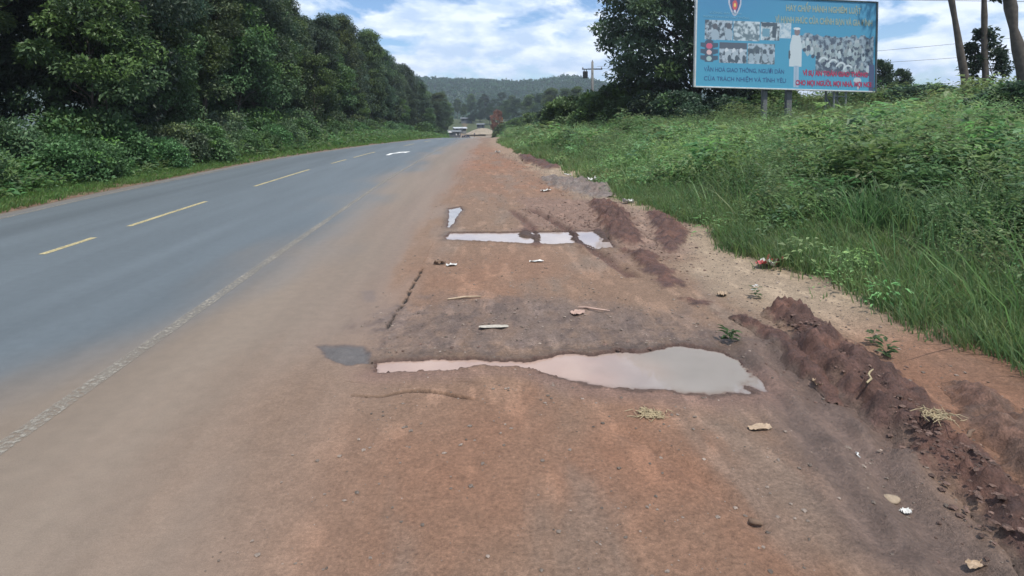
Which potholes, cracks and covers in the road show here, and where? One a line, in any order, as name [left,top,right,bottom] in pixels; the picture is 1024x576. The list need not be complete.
pothole [338,332,805,418]
pothole [420,225,640,260]
crack [363,262,439,337]
crack [319,380,504,415]
